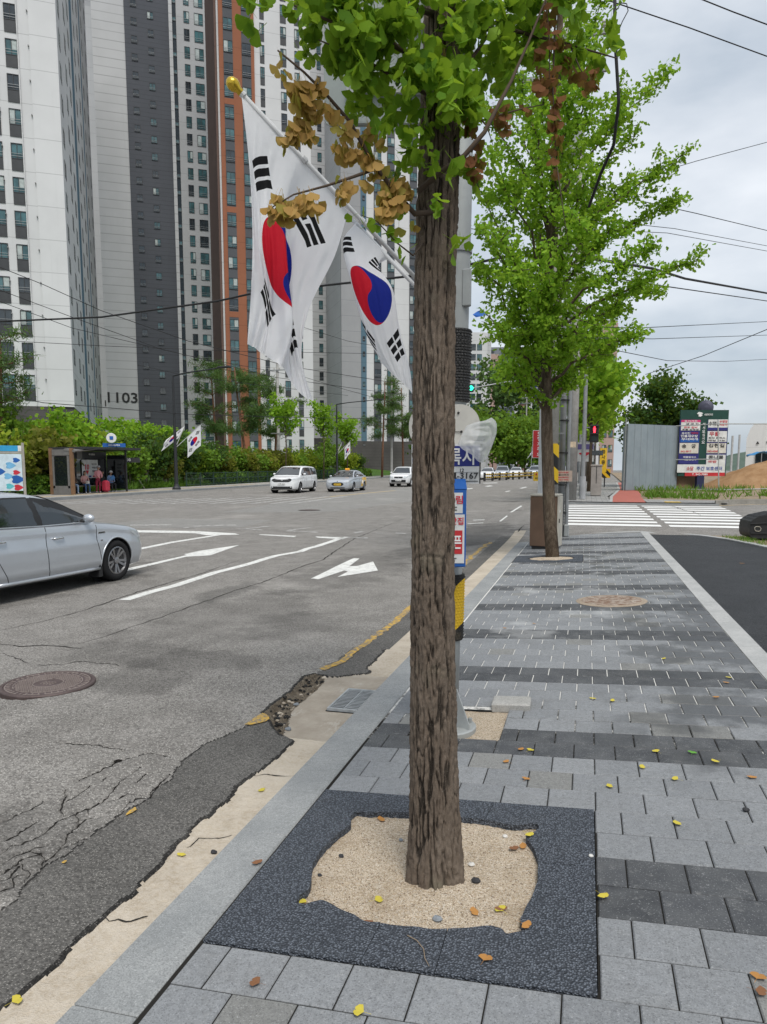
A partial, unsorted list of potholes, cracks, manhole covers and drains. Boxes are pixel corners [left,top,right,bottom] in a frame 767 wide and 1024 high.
manhole cover [576,595,648,608]
drain grate [326,688,376,714]
crack [4,644,119,666]
crack [0,753,171,892]
manhole cover [0,671,96,700]
pothole [264,674,327,735]
